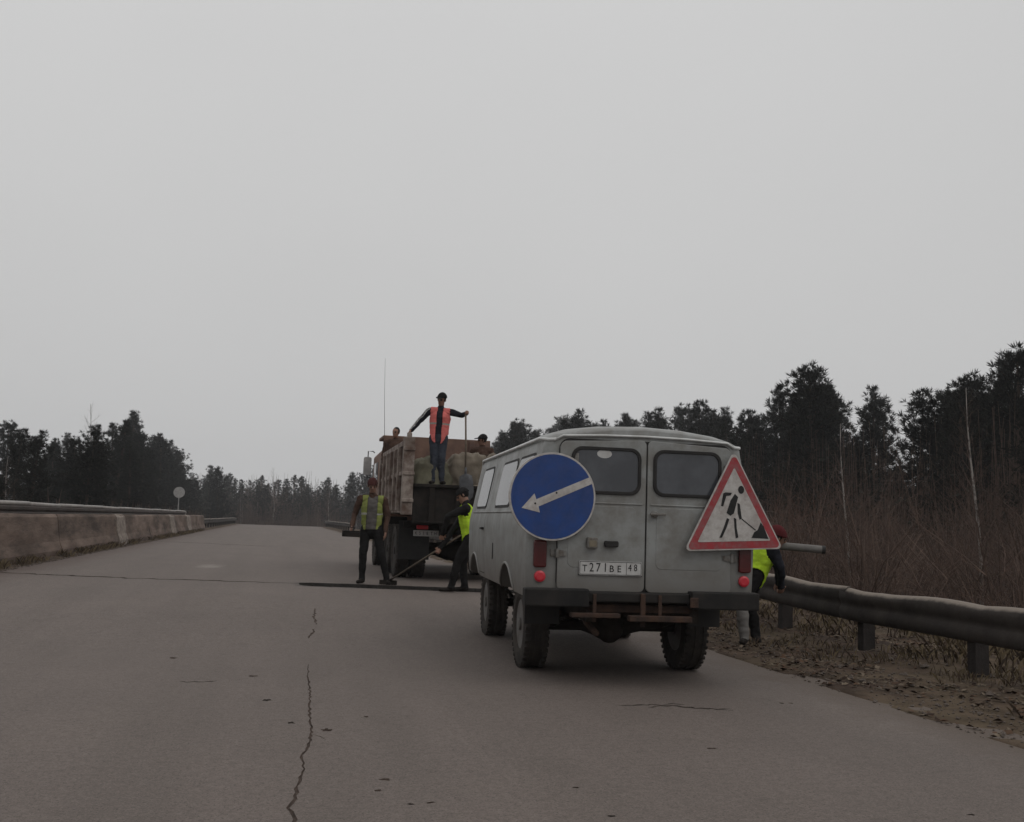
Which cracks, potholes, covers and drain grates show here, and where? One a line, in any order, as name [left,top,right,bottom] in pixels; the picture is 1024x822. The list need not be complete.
crack [286,664,326,822]
